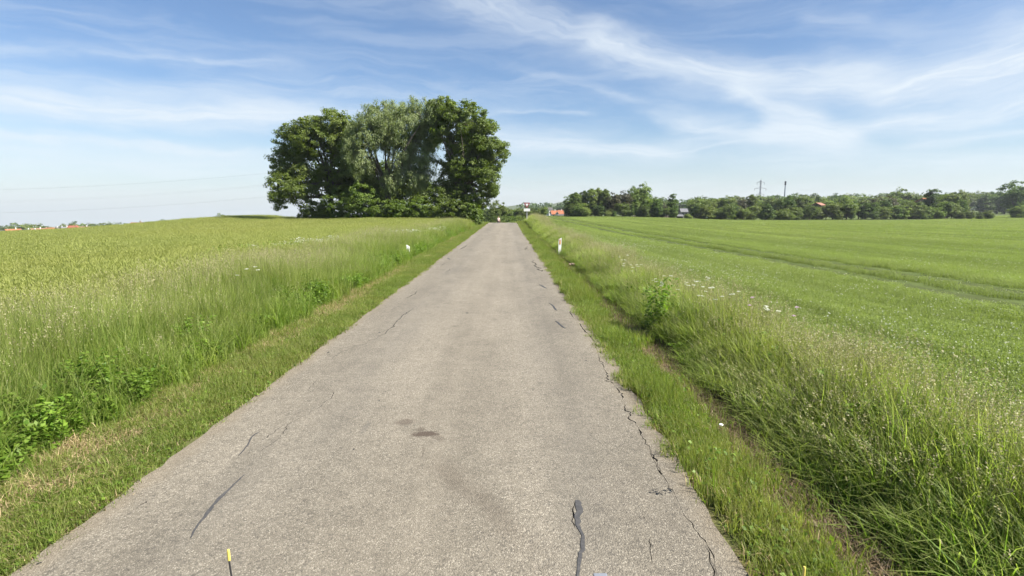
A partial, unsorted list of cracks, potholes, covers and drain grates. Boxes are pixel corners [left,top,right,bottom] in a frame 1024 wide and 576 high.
crack [259,378,334,452]
crack [595,343,717,576]
